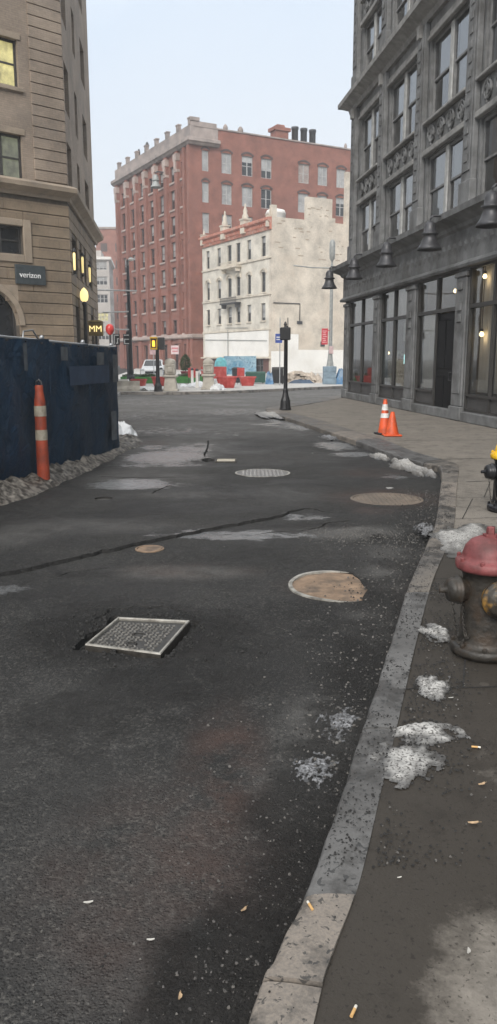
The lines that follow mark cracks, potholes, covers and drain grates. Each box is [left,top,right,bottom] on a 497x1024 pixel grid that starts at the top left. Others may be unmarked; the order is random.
manhole cover [235,469,290,477]
manhole cover [135,545,164,553]
manhole cover [288,570,368,602]
crack [0,476,362,578]
manhole cover [61,609,205,659]
manhole cover [350,493,424,505]
